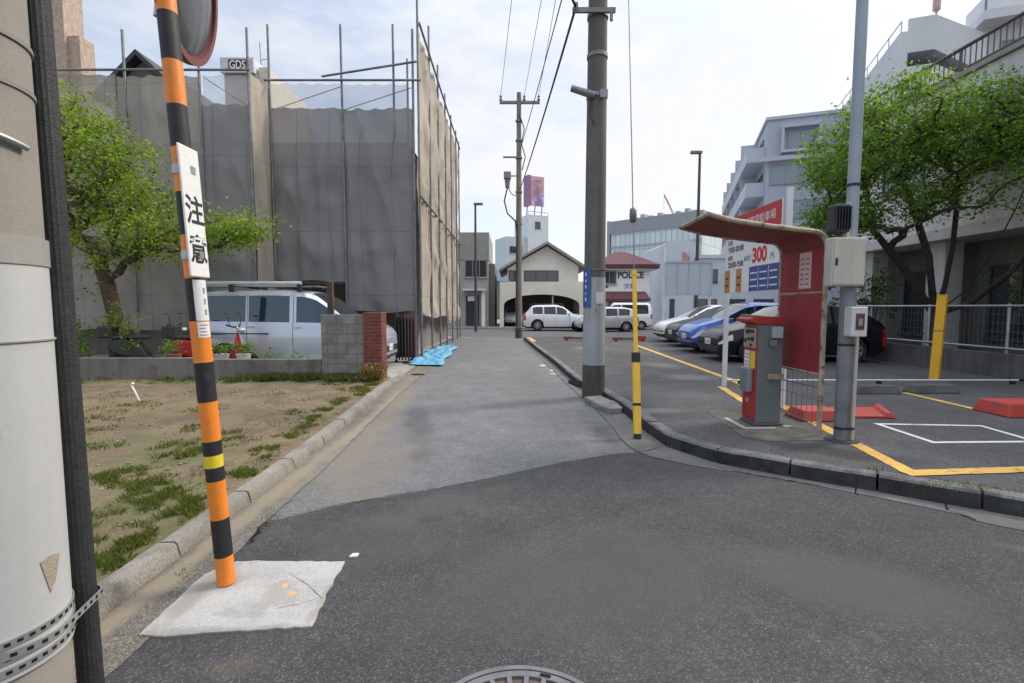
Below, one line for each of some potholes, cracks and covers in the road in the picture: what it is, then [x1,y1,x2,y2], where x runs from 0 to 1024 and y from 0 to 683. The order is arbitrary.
manhole cover [455,665,584,683]
